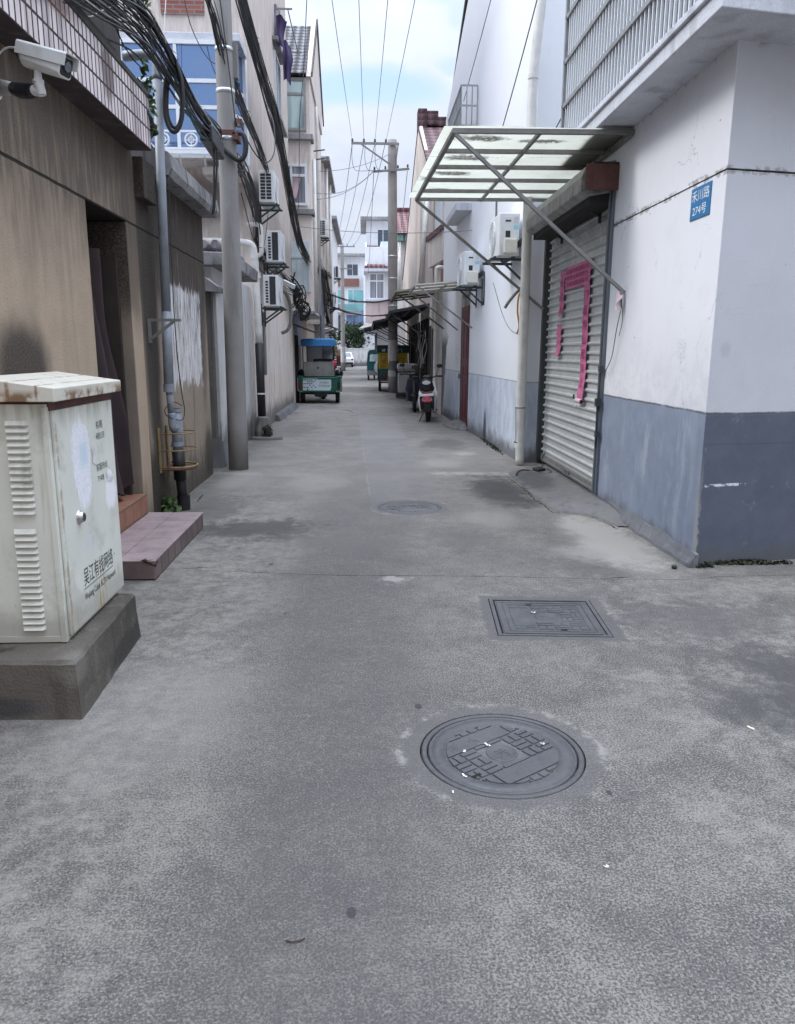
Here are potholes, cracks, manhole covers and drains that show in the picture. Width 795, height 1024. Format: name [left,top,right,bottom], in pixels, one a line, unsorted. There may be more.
manhole cover [421,714,585,800]
manhole cover [378,501,441,514]
manhole cover [489,599,613,637]
